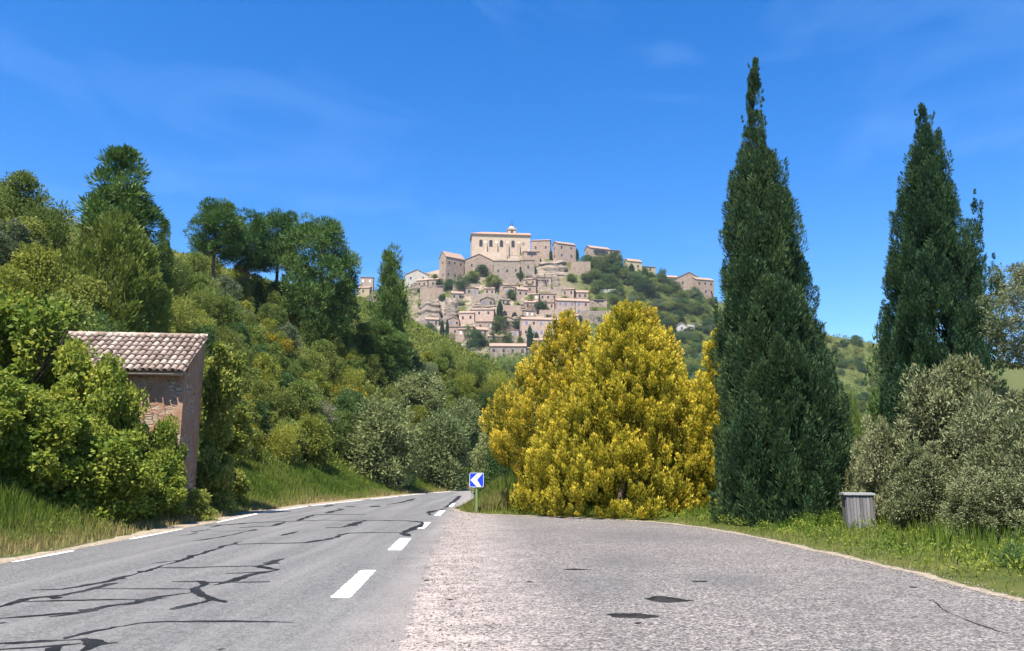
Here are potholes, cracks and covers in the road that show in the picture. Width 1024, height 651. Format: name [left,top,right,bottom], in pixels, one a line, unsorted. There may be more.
crack [930,600,1007,633]
